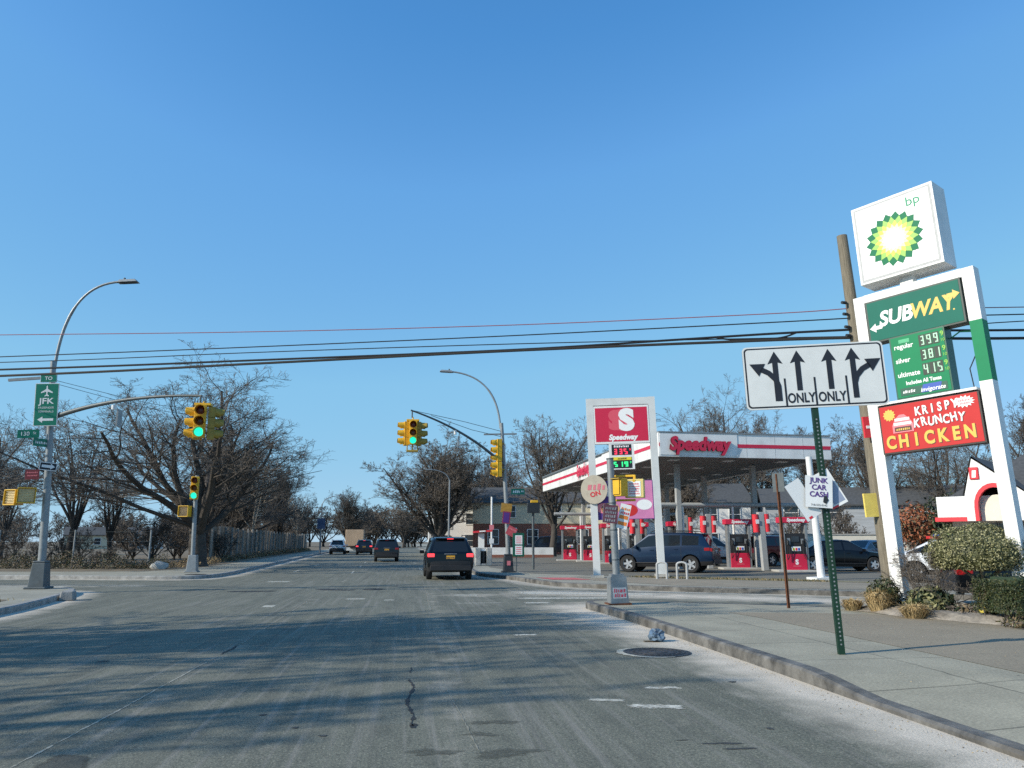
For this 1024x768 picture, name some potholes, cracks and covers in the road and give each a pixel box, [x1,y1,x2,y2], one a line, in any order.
manhole cover [616,647,691,658]
crack [405,667,416,725]
